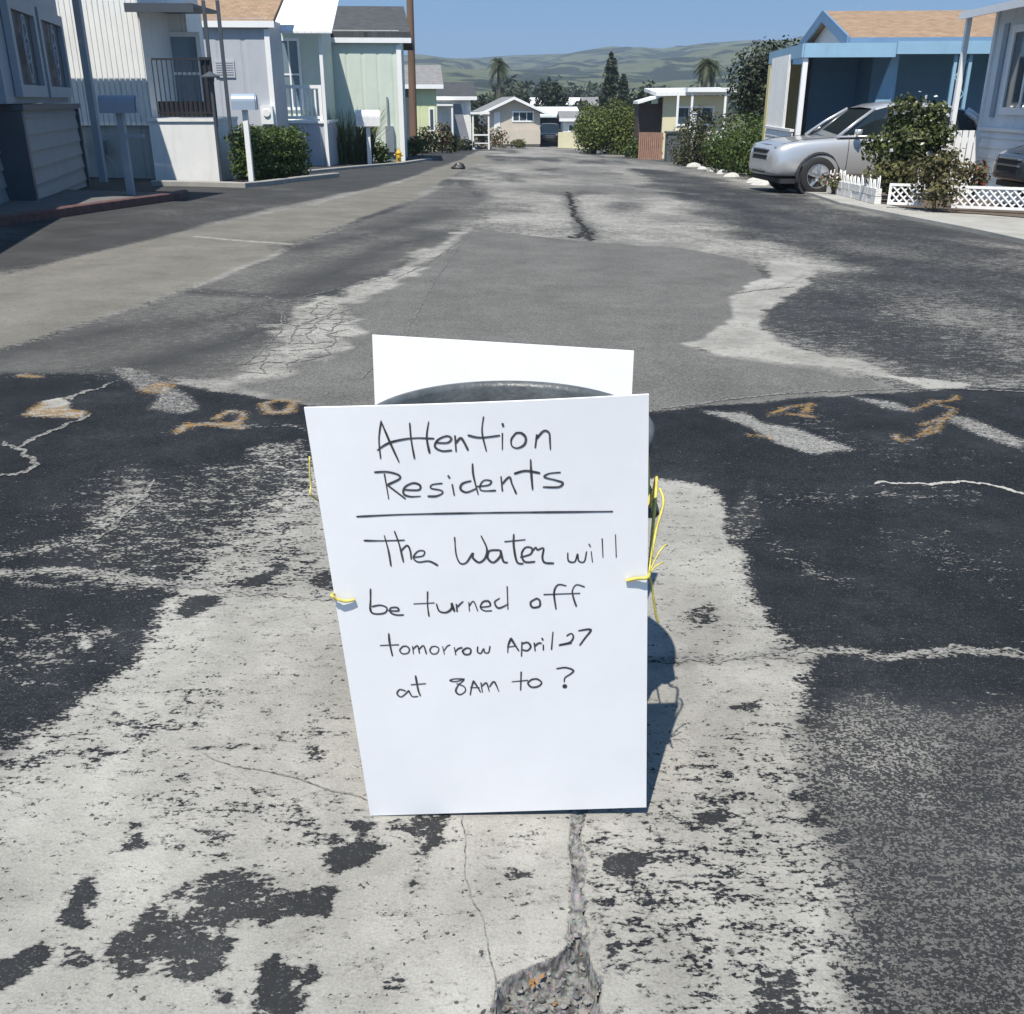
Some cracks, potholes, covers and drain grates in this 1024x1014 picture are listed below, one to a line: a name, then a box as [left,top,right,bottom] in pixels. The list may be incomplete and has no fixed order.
crack [0,382,112,476]
crack [200,228,616,379]
crack [461,813,497,1014]
pothole [490,826,604,1014]
crack [203,753,367,800]
crack [0,479,1024,665]
crack [566,192,596,241]
